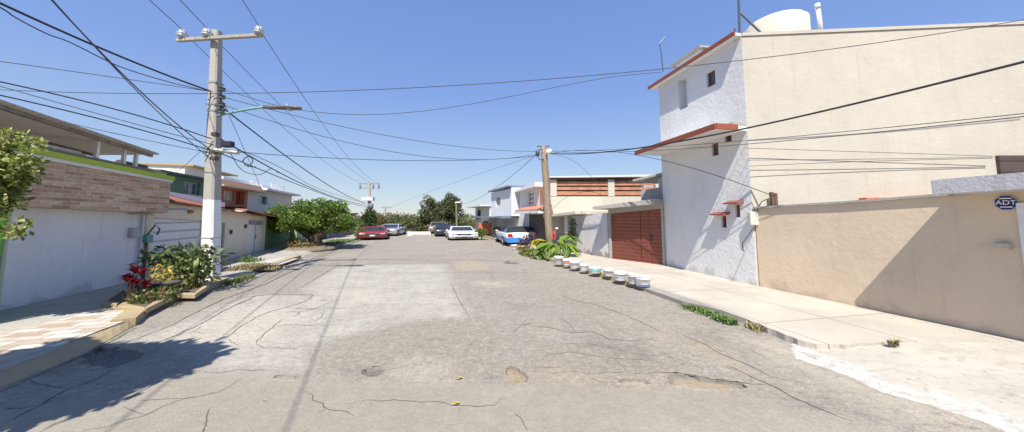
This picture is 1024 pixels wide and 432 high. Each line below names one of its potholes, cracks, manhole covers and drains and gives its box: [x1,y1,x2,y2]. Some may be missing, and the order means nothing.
pothole [502,365,531,387]
crack [83,378,242,432]
crack [306,391,527,429]
crack [512,298,854,422]
pothole [664,372,753,391]
pothole [357,367,387,379]
crack [103,258,352,348]
